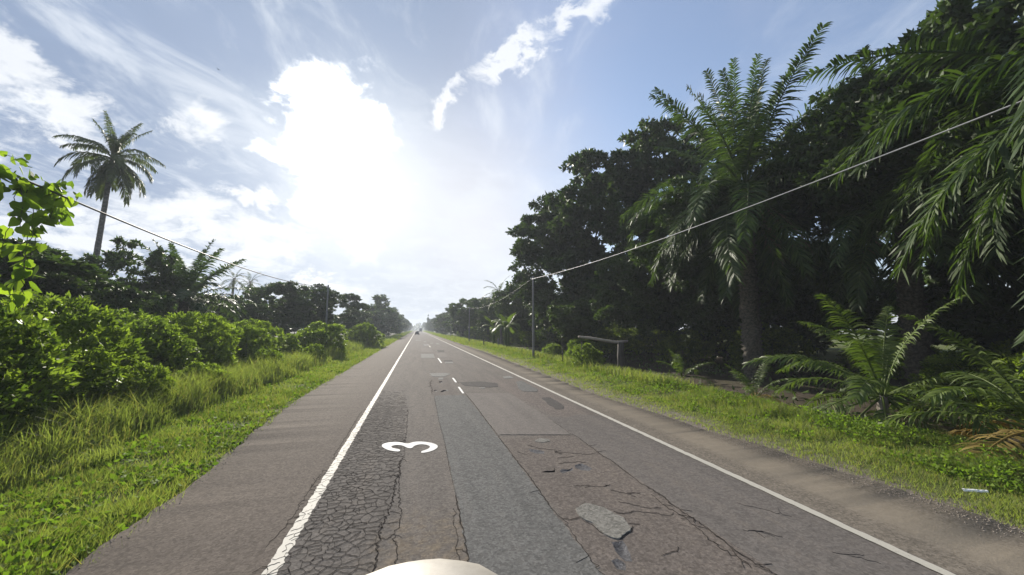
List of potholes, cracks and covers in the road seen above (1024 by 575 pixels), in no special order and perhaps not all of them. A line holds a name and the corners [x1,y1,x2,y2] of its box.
crack [563,485,791,575]
pothole [611,540,632,561]
crack [252,392,408,575]
